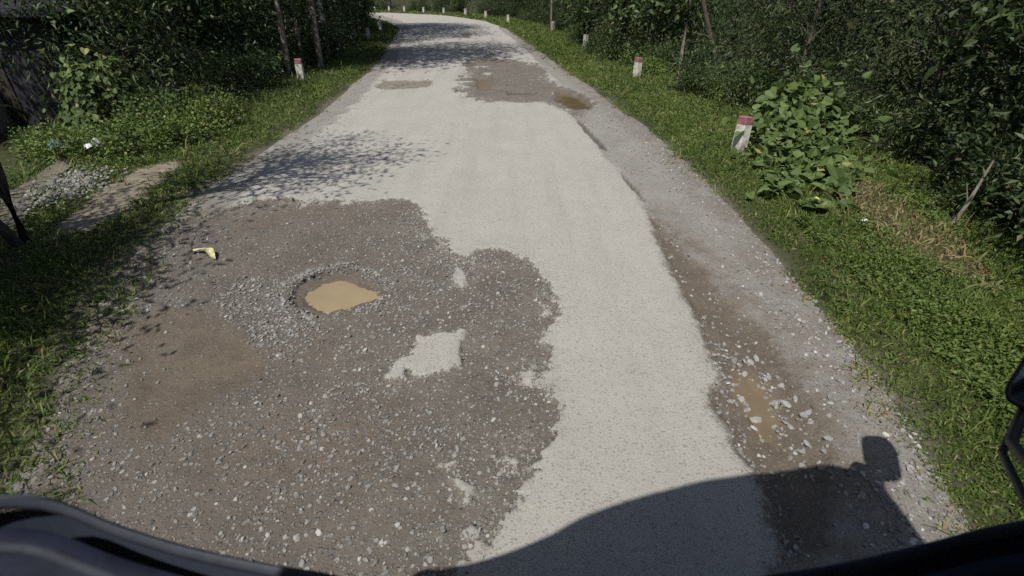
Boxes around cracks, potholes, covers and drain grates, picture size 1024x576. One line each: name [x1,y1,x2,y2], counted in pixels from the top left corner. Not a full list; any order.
pothole [648,215,841,557]
pothole [291,269,384,316]
pothole [473,77,500,91]
pothole [553,91,598,110]
